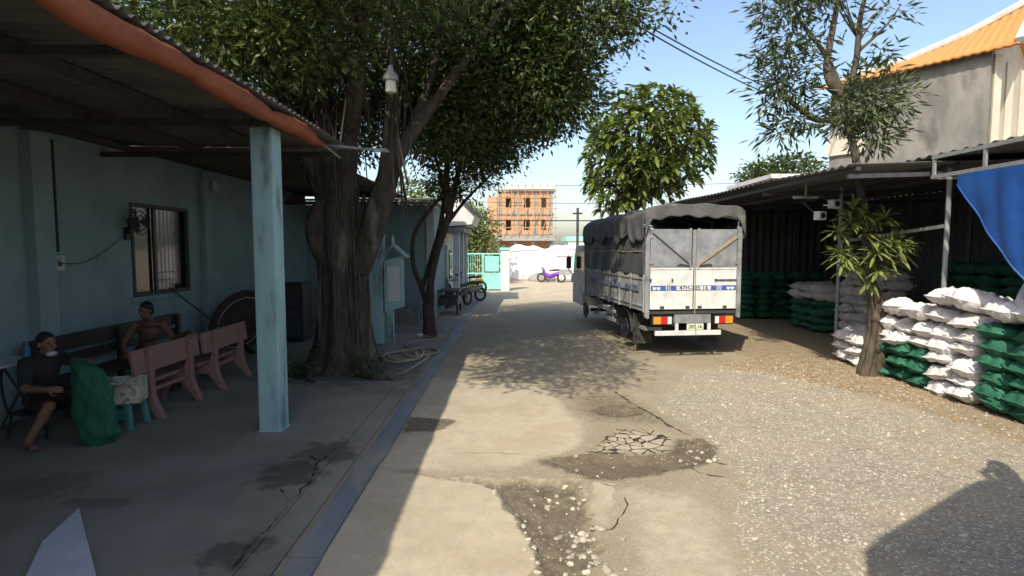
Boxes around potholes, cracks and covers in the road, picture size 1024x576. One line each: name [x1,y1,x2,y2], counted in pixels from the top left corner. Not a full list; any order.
crack [231,448,337,572]
pothole [544,440,715,479]
crack [591,484,629,530]
pothole [443,476,606,576]
crack [588,391,726,477]
